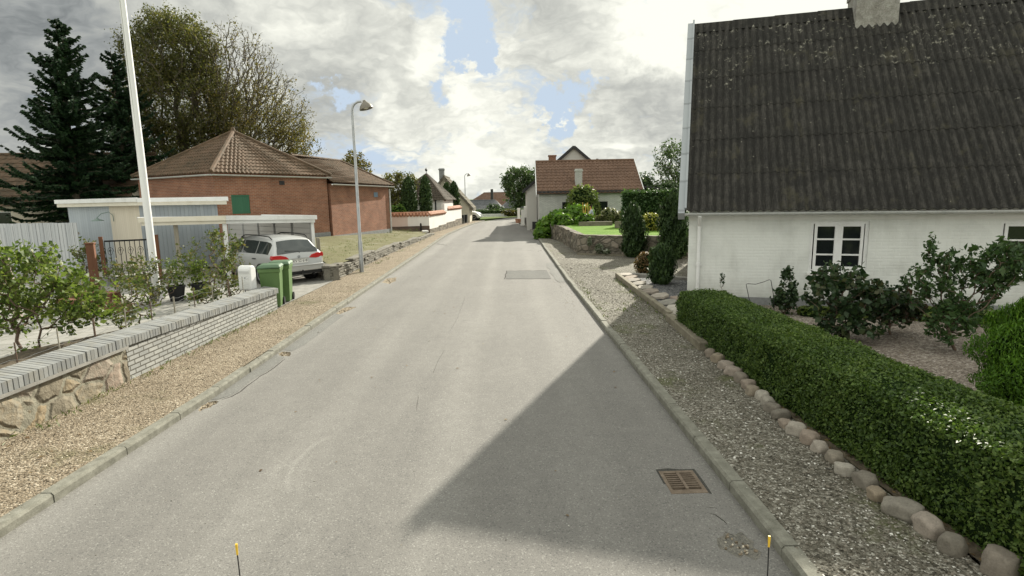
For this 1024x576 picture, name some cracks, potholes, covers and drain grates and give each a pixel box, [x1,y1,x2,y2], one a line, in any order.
pothole [717,531,761,561]
drain grate [656,468,712,494]
crack [222,360,283,400]
